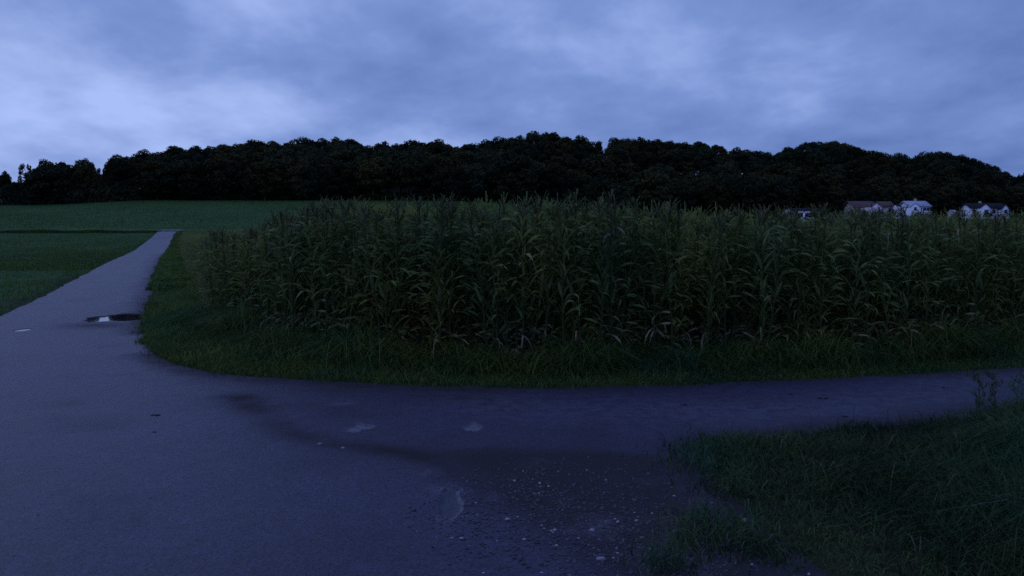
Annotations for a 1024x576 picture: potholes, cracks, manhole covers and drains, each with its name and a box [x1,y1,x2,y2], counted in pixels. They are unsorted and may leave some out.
pothole [83,313,142,322]
